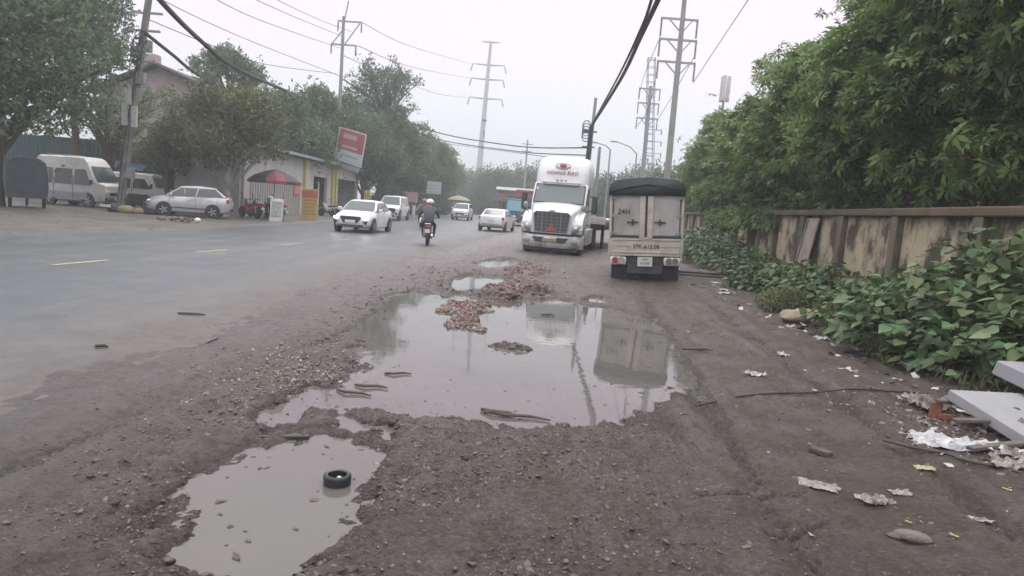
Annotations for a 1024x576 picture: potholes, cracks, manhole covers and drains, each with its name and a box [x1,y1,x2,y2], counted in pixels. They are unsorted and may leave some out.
pothole [464,256,526,268]
pothole [320,288,701,432]
pothole [108,421,404,576]
pothole [439,269,521,292]
pothole [513,284,573,299]
